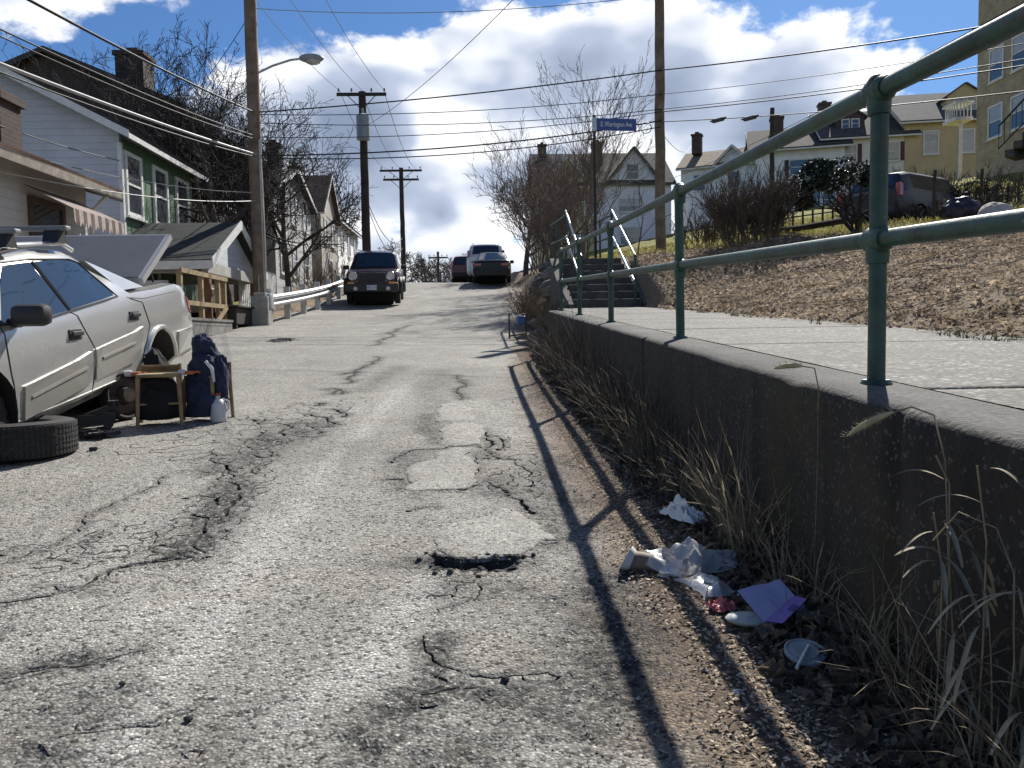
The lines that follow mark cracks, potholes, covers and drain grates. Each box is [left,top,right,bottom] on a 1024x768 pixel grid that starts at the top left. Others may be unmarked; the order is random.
crack [0,325,409,609]
crack [410,634,563,707]
crack [382,429,557,514]
pothole [416,552,536,579]
